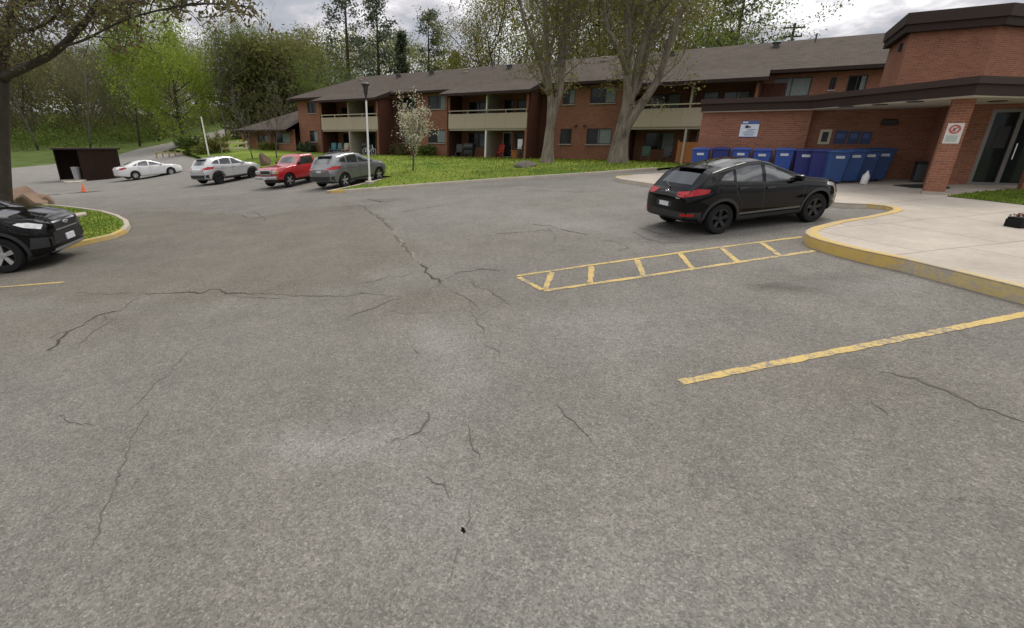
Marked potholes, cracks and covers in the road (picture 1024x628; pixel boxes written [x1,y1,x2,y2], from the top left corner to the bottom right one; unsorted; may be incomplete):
crack [388,409,430,444]
crack [46,274,427,351]
crack [86,353,187,553]
crack [429,267,516,357]
crack [871,371,1024,422]
